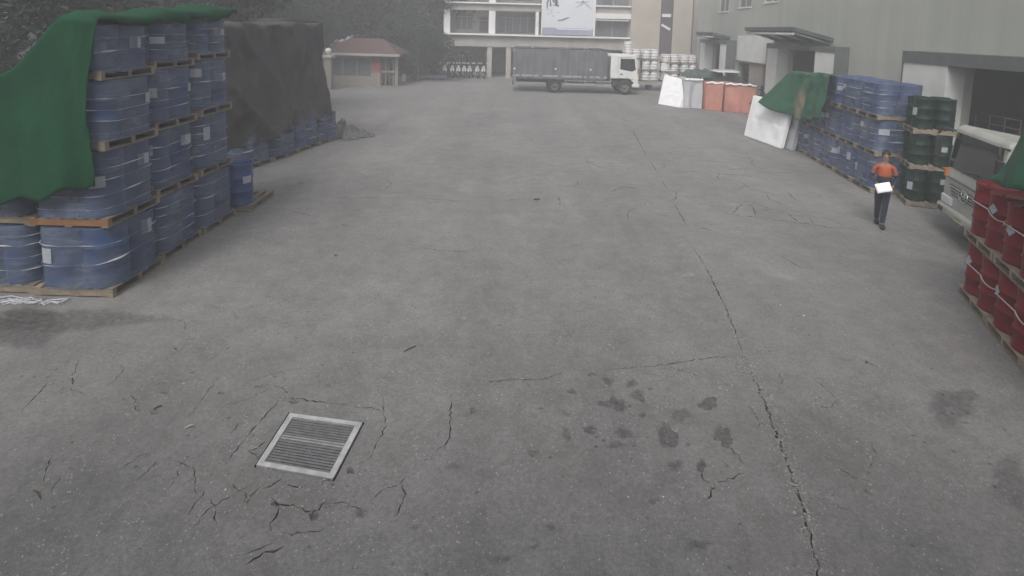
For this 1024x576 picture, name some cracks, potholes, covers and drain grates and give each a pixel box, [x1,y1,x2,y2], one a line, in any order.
crack [608,228,745,376]
crack [701,448,743,499]
crack [423,401,452,463]
crack [714,161,853,230]
drain grate [254,413,364,481]
crack [163,369,386,463]
crack [115,453,407,565]
